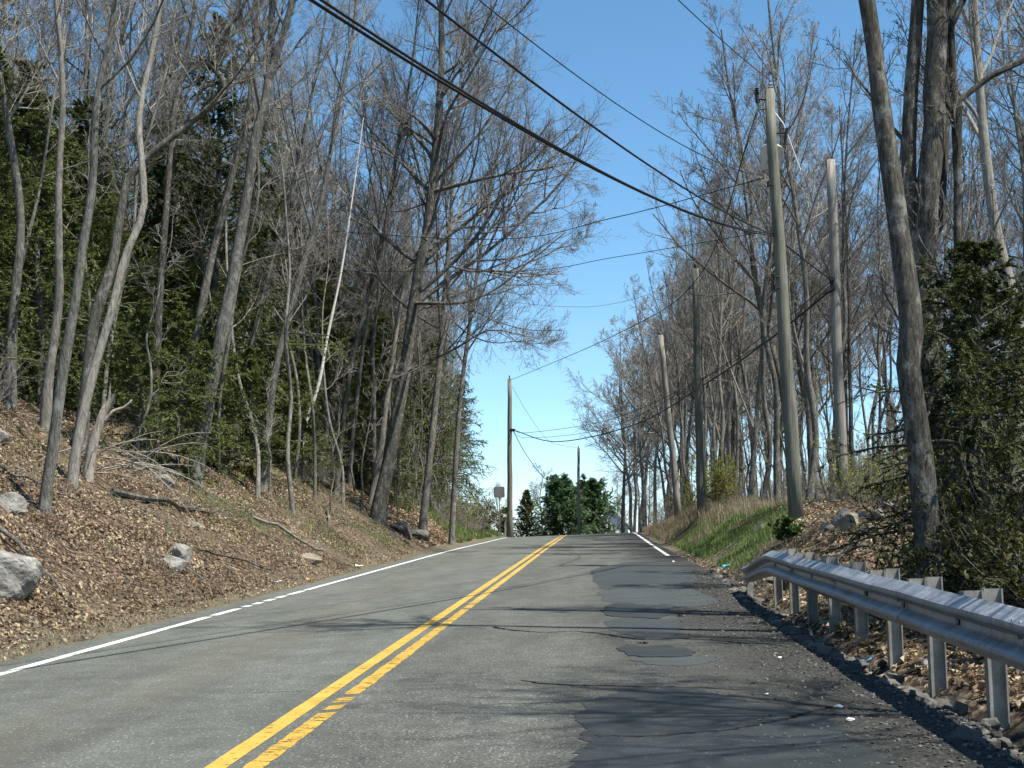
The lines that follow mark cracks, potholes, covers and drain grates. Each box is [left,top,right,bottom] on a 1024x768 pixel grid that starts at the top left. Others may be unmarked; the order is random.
crack [493,627,777,645]
crack [521,680,736,690]
crack [617,700,860,737]
